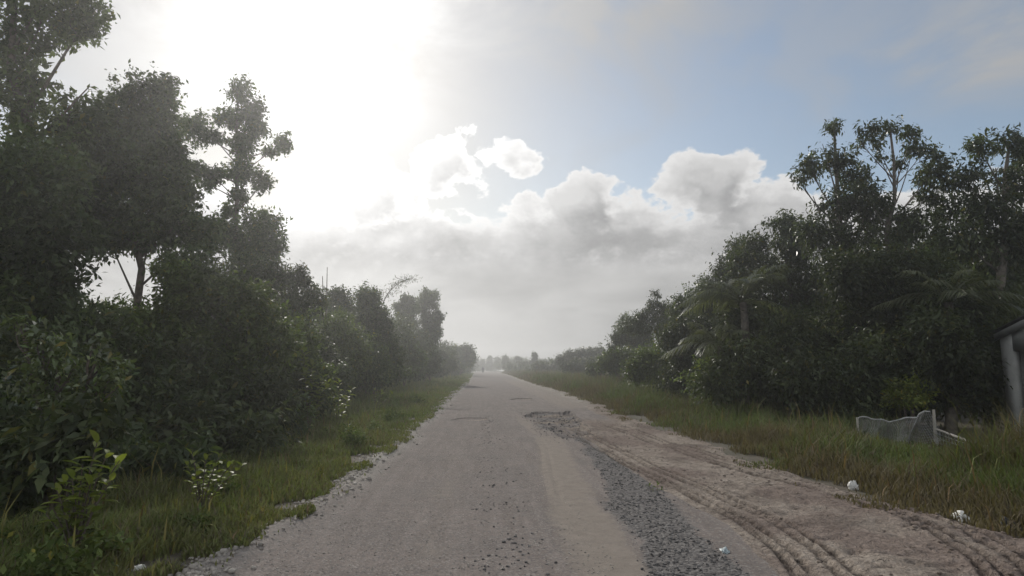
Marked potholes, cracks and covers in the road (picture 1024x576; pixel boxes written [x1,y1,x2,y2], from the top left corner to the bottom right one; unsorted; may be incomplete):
pothole [521,410,595,441]
